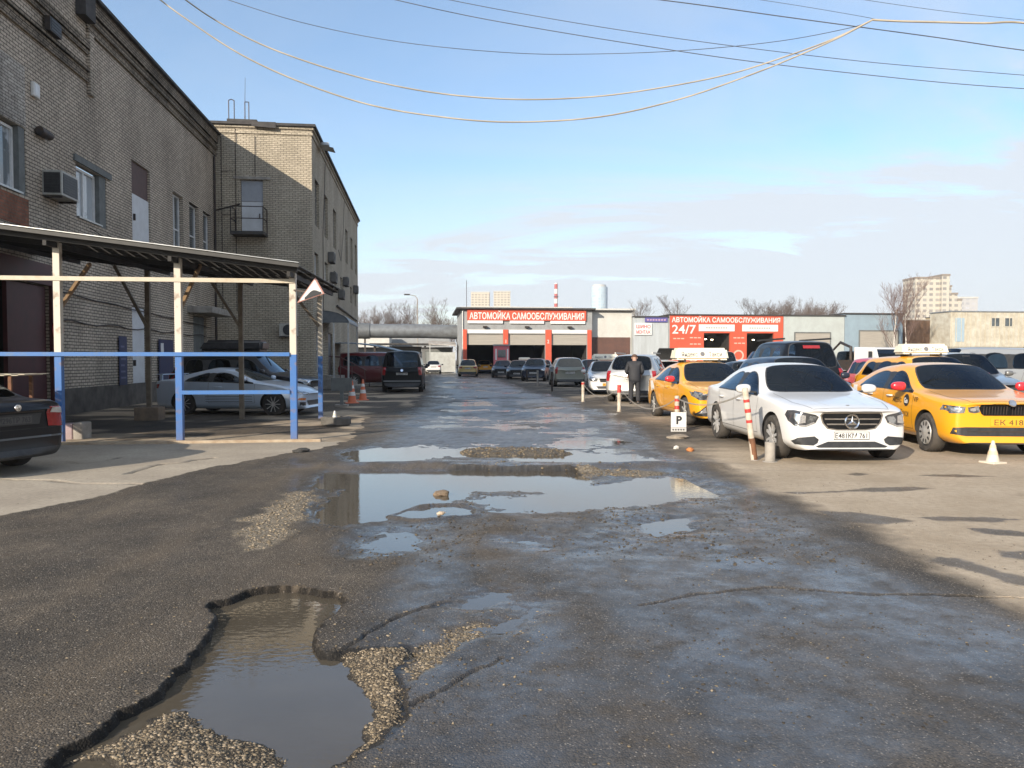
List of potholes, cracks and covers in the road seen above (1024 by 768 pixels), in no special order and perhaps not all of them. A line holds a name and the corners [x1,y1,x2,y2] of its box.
crack [325,600,505,707]
pothole [40,585,421,768]
pothole [462,447,573,458]
pothole [308,464,593,525]
crack [637,586,1024,607]
